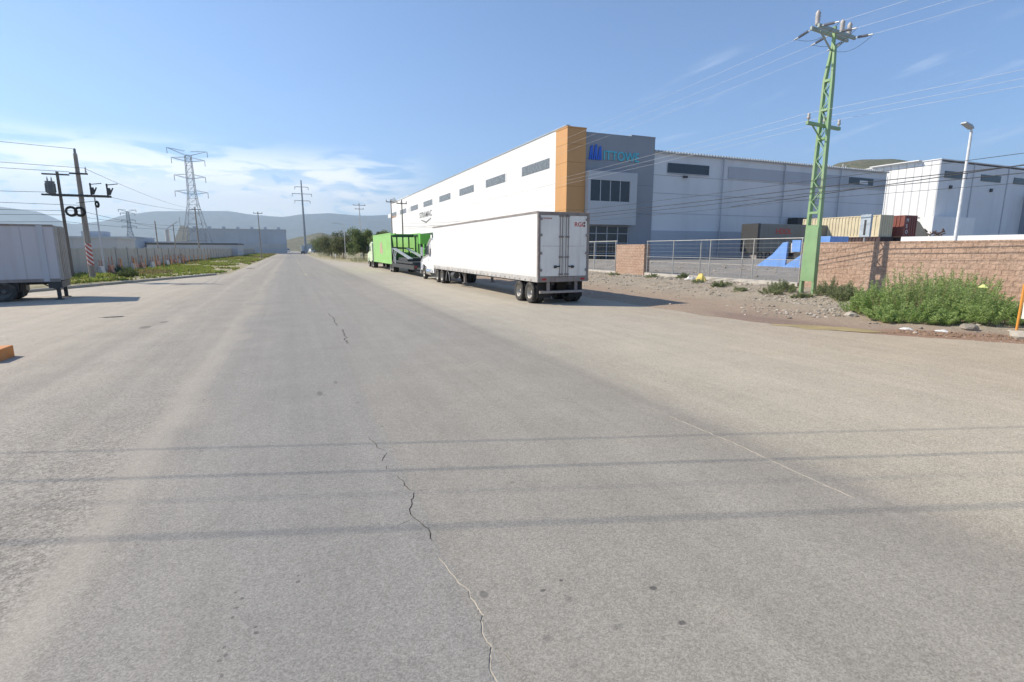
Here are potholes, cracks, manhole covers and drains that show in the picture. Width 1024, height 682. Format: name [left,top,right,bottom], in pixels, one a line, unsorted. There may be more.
crack [438,558,514,682]
crack [369,438,433,541]
